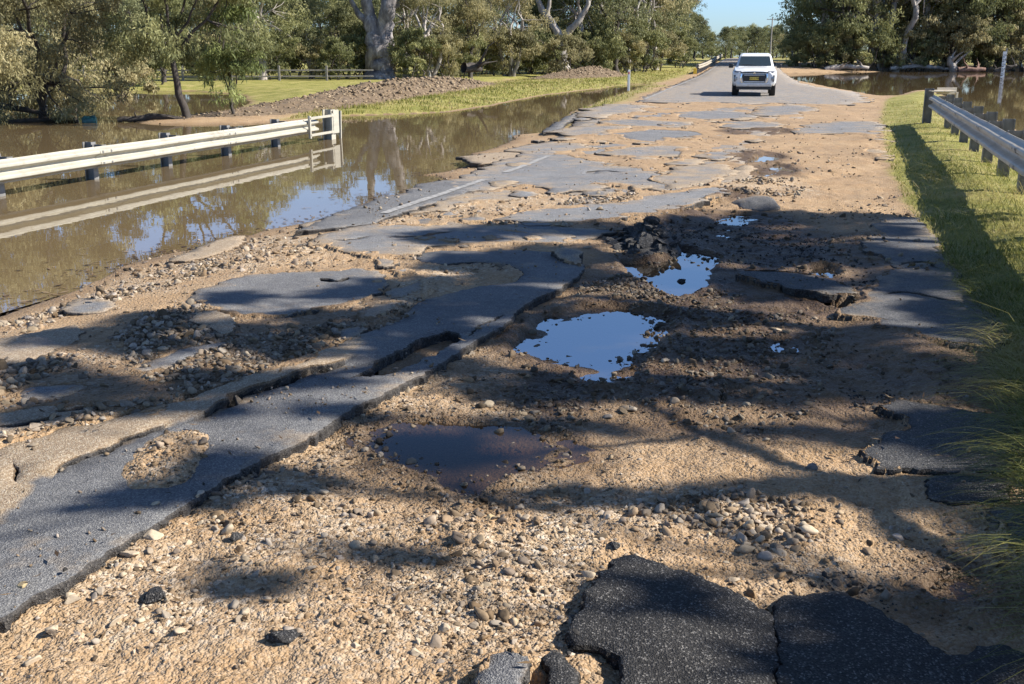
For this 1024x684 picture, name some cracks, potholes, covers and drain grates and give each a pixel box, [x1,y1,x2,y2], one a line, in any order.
pothole [613,246,730,294]
pothole [499,299,682,382]
pothole [731,149,784,163]
pothole [352,414,592,498]
pothole [709,211,759,227]
